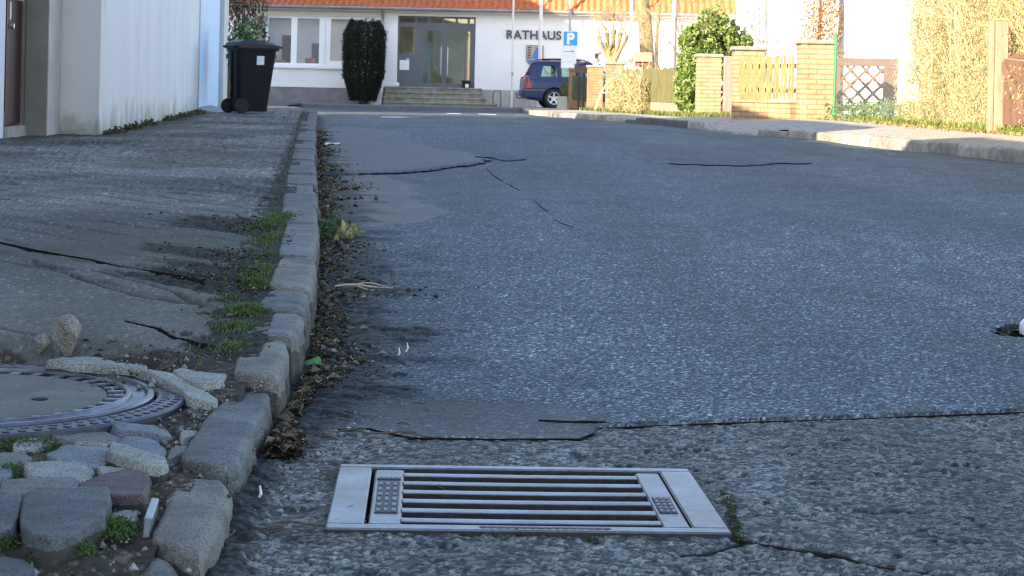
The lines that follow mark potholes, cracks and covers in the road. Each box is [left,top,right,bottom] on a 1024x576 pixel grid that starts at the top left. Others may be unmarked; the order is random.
crack [124,321,215,349]
pothole [994,323,1024,337]
drain grate [325,464,732,541]
manhole cover [0,363,186,446]
crack [0,242,205,285]
crack [682,539,935,576]
crack [345,156,573,228]
